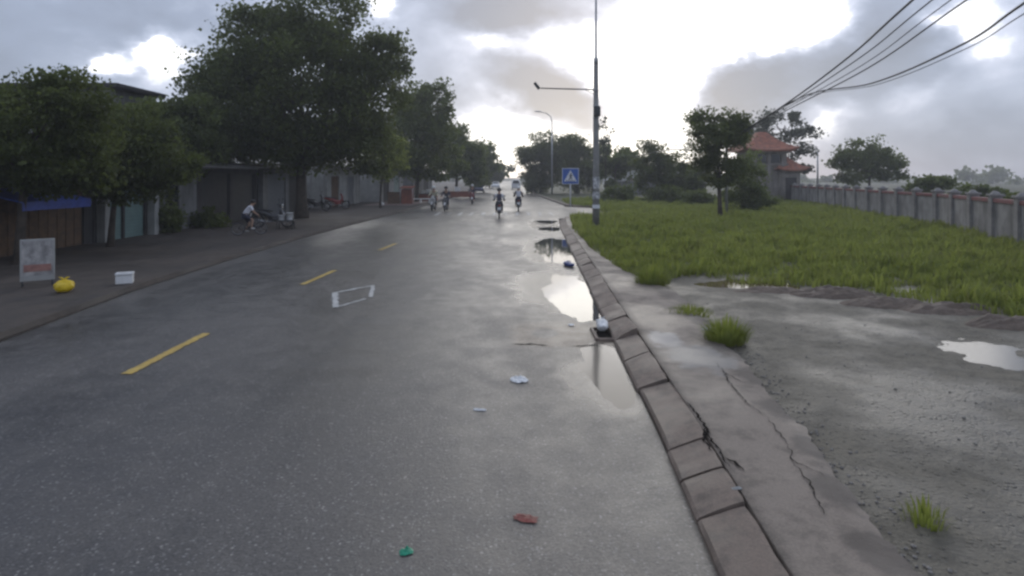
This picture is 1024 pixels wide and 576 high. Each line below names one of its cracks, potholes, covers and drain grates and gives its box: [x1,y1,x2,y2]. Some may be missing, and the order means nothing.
crack [718,366,824,511]
crack [684,401,744,470]
drain grate [590,327,614,342]
